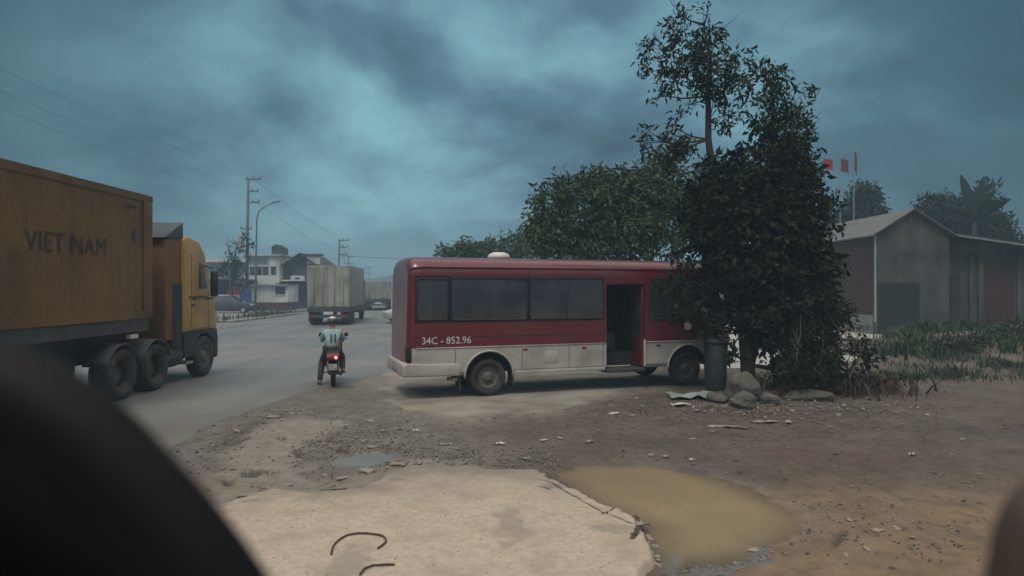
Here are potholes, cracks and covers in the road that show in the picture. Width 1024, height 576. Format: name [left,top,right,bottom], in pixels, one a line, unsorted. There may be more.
pothole [330,451,408,468]
crack [540,481,650,539]
pothole [549,460,812,576]
